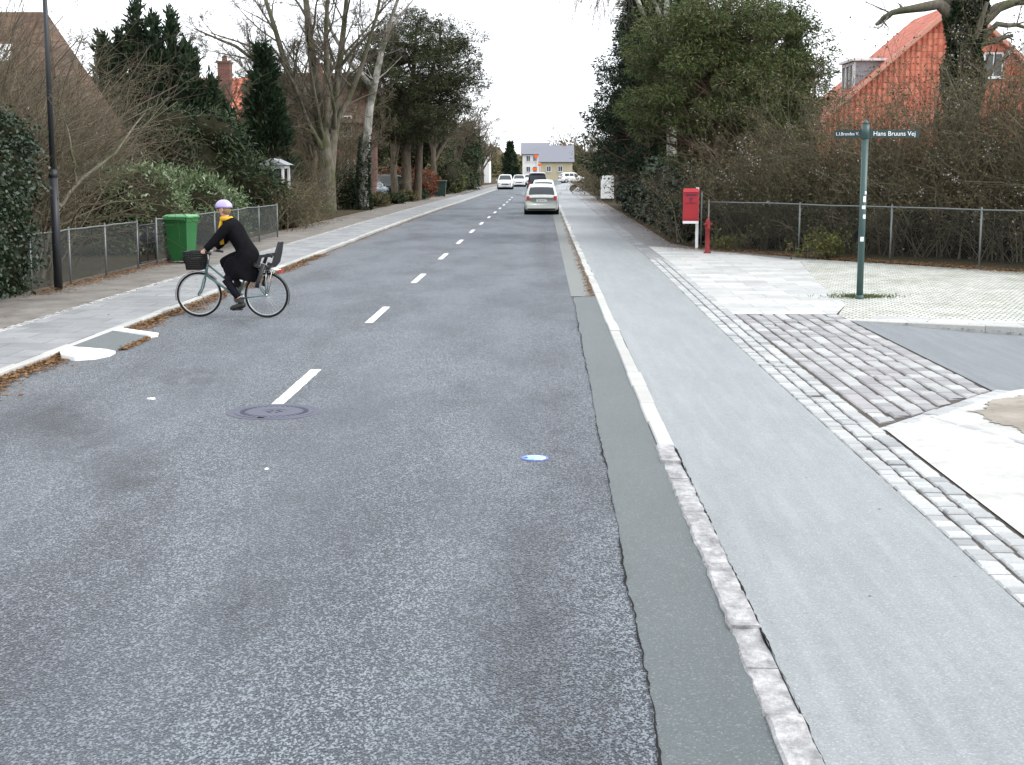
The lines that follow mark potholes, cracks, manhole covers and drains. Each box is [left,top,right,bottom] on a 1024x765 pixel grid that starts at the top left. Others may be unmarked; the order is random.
manhole cover [226,404,322,420]
